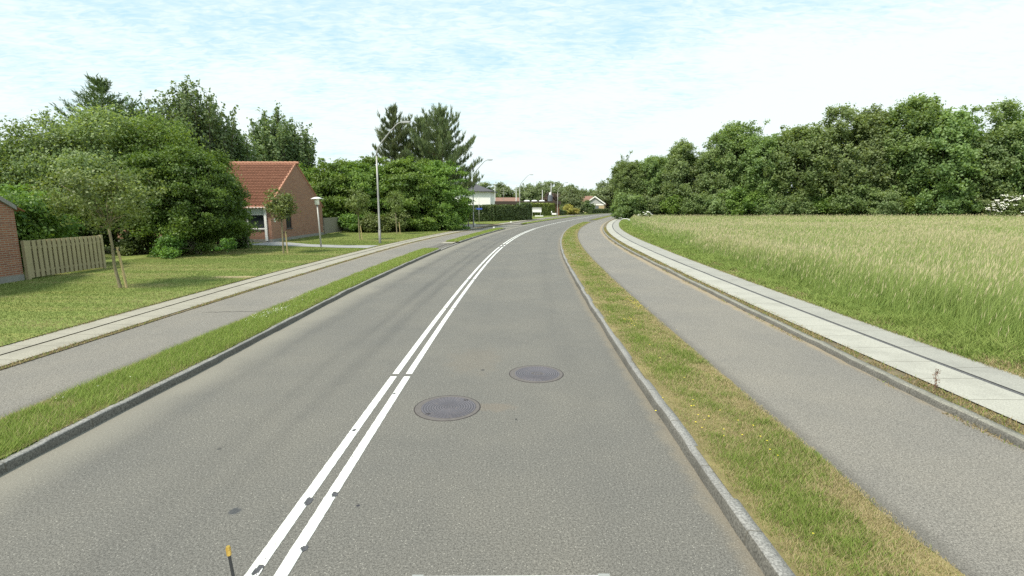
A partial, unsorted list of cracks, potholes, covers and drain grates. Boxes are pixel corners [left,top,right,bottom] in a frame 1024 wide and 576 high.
manhole cover [509,365,564,383]
manhole cover [414,395,481,421]
